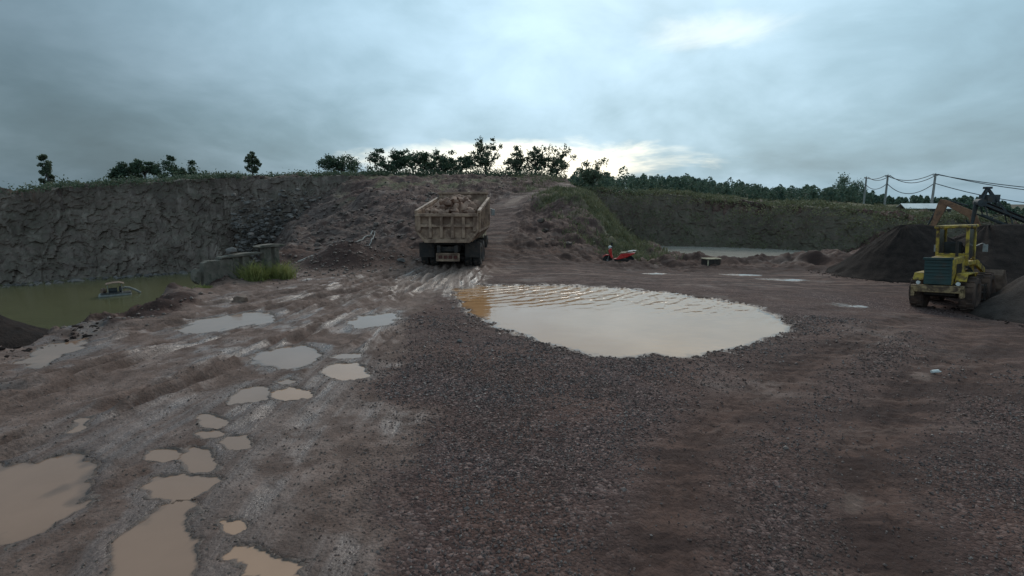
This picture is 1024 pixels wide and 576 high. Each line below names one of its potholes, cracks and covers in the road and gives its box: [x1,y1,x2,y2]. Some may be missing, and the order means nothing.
pothole [247,343,326,370]
pothole [173,445,223,474]
pothole [224,385,275,406]
pothole [267,384,317,402]
pothole [141,447,184,463]
pothole [193,412,232,430]
pothole [0,449,103,550]
pothole [215,518,251,541]
pothole [215,433,255,451]
pothole [318,361,373,381]
pothole [134,469,225,504]
pothole [105,498,207,576]
